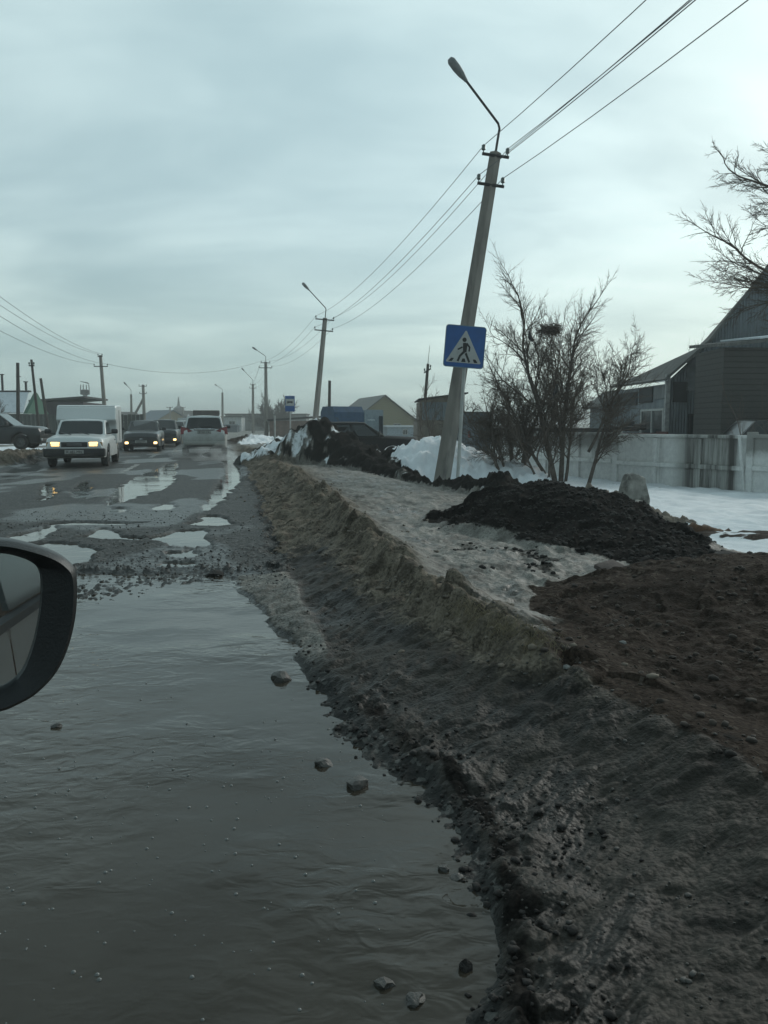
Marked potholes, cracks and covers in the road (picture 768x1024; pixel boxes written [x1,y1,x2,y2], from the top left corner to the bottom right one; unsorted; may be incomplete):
pothole [71,527,153,540]
pothole [32,482,63,499]
pothole [100,461,185,506]
pothole [182,514,241,526]
pothole [186,446,246,513]
pothole [30,540,106,565]
pothole [5,524,62,542]
pothole [139,527,218,548]
